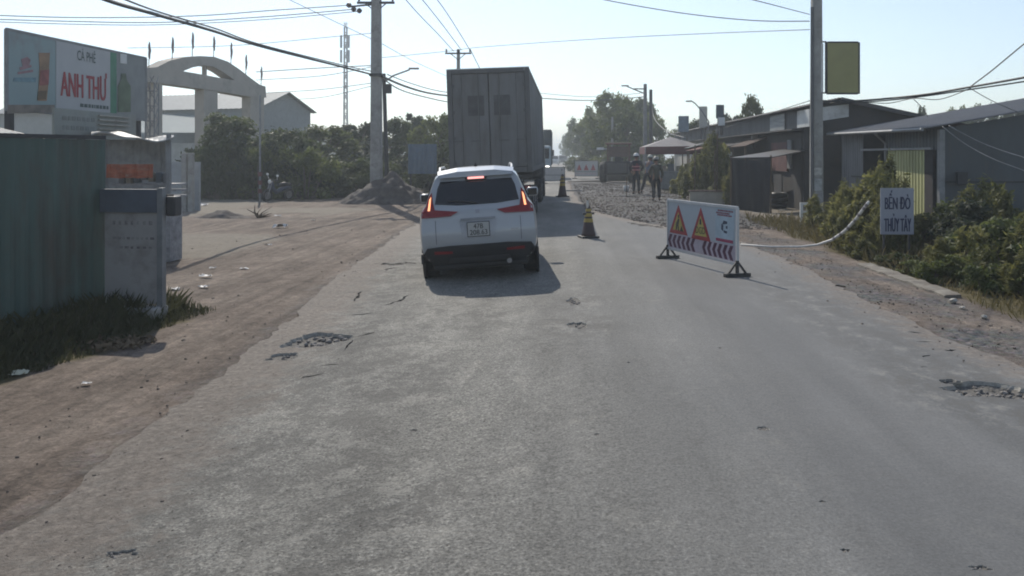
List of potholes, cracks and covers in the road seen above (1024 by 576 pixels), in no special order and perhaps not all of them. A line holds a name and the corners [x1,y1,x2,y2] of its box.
pothole [264,352,299,361]
pothole [939,381,1024,399]
pothole [279,332,358,348]
crack [298,332,375,380]
crack [375,262,416,270]
